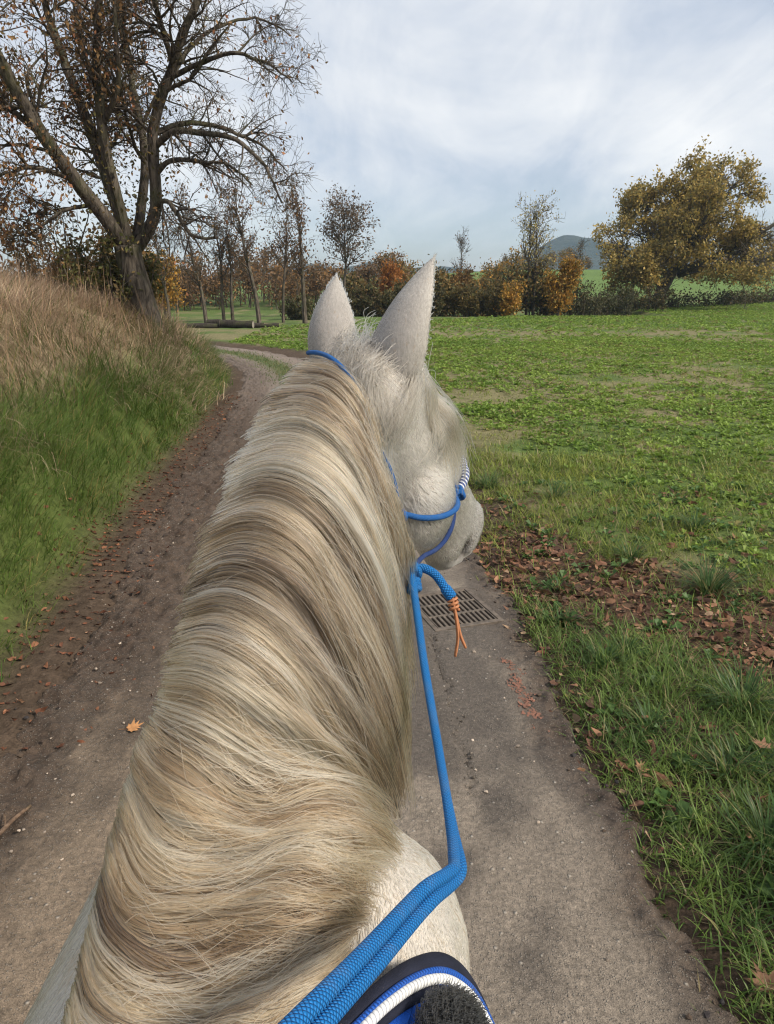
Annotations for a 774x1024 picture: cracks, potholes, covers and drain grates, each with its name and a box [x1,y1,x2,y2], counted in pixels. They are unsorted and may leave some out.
drain grate [408,587,505,632]
